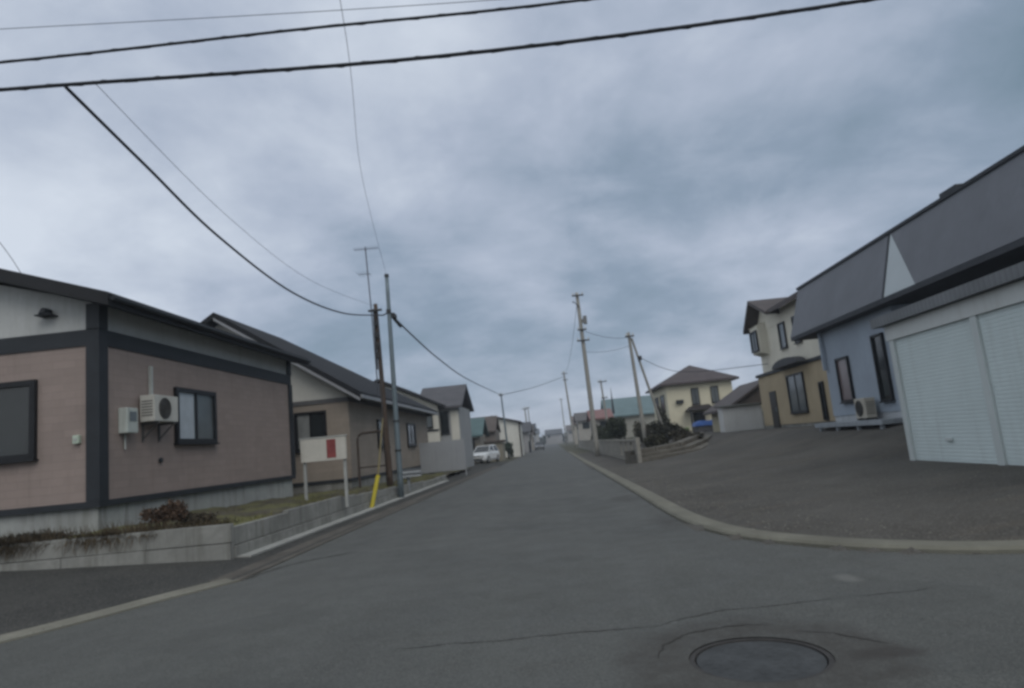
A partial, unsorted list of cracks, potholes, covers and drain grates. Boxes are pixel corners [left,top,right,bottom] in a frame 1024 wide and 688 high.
crack [389,625,651,650]
crack [655,588,926,657]
manhole cover [689,638,835,683]
